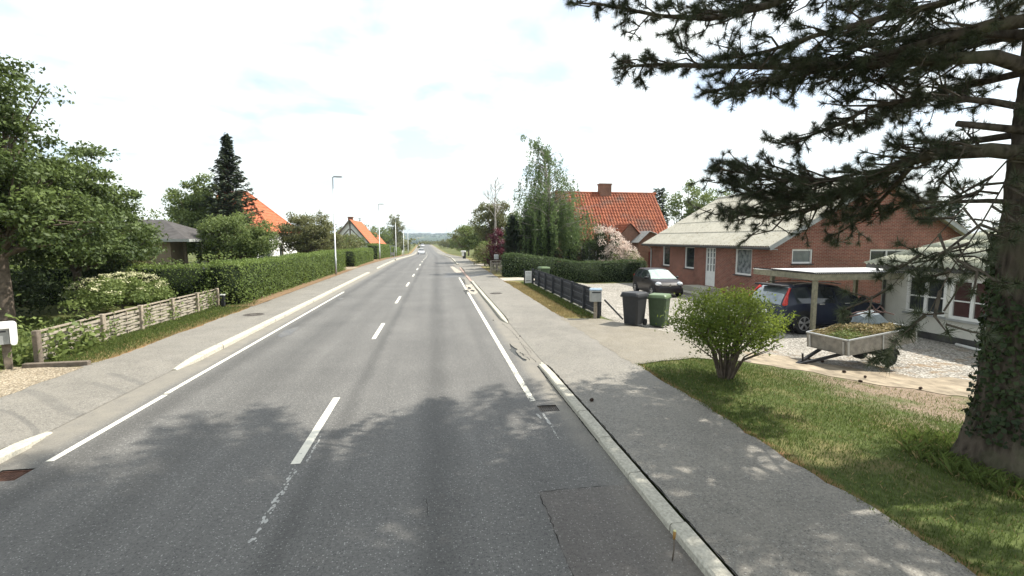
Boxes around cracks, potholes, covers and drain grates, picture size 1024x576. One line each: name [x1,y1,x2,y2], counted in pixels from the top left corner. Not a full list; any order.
drain grate [0,468,35,481]
crack [540,486,597,576]
